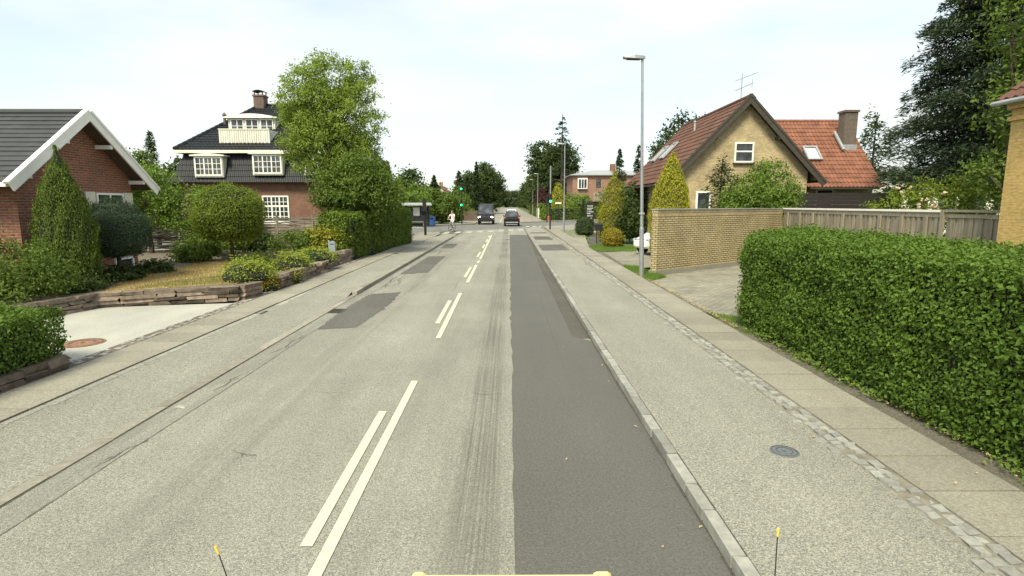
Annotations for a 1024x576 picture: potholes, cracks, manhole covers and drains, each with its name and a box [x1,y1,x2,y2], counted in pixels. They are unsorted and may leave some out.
manhole cover [64,338,106,348]
manhole cover [769,445,800,458]
